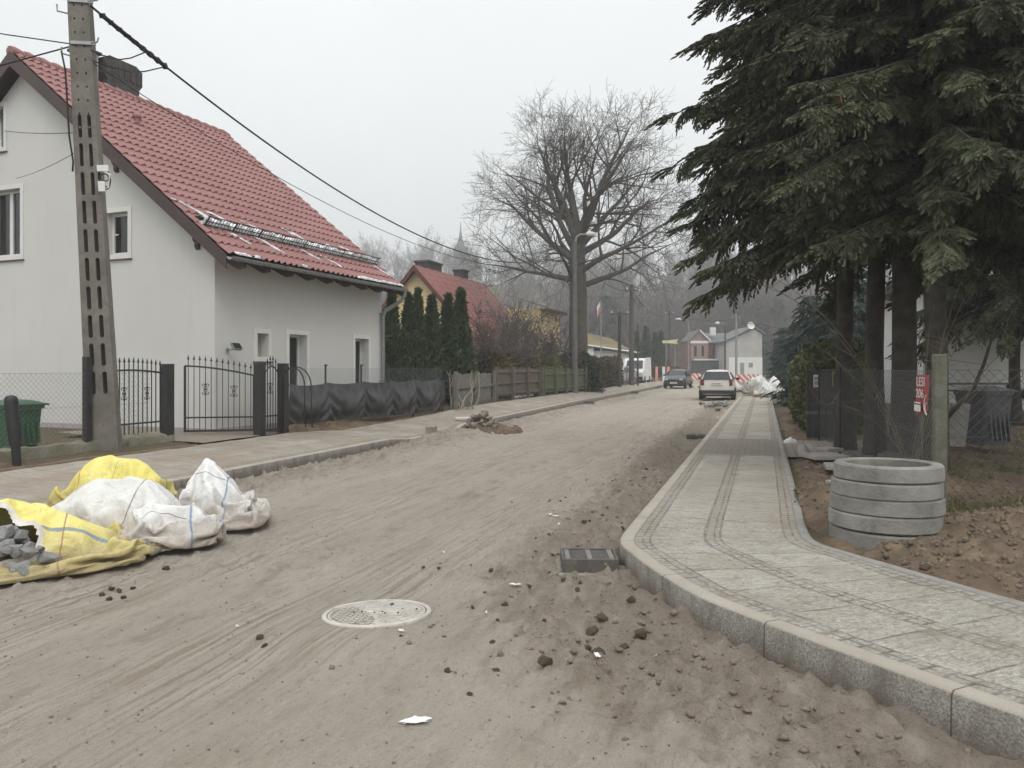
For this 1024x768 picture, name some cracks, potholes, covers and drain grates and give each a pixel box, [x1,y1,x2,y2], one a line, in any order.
drain grate [556,548,619,577]
manhole cover [322,599,431,629]
